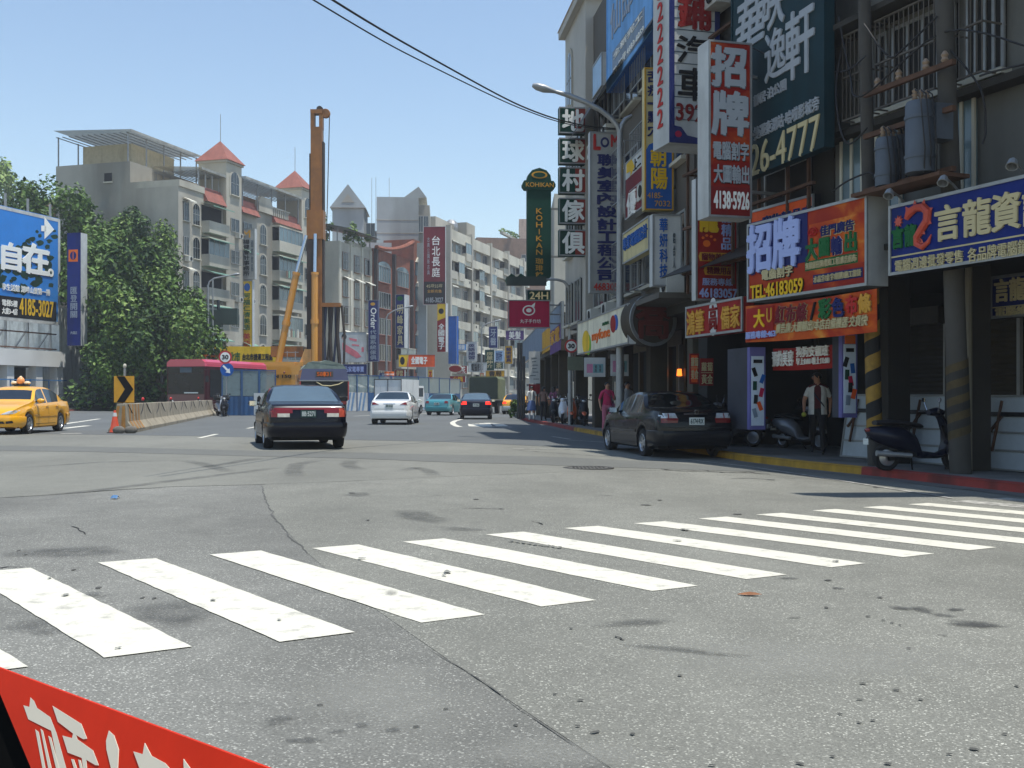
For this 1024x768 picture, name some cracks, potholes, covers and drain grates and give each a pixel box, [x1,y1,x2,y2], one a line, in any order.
crack [262,486,307,553]
